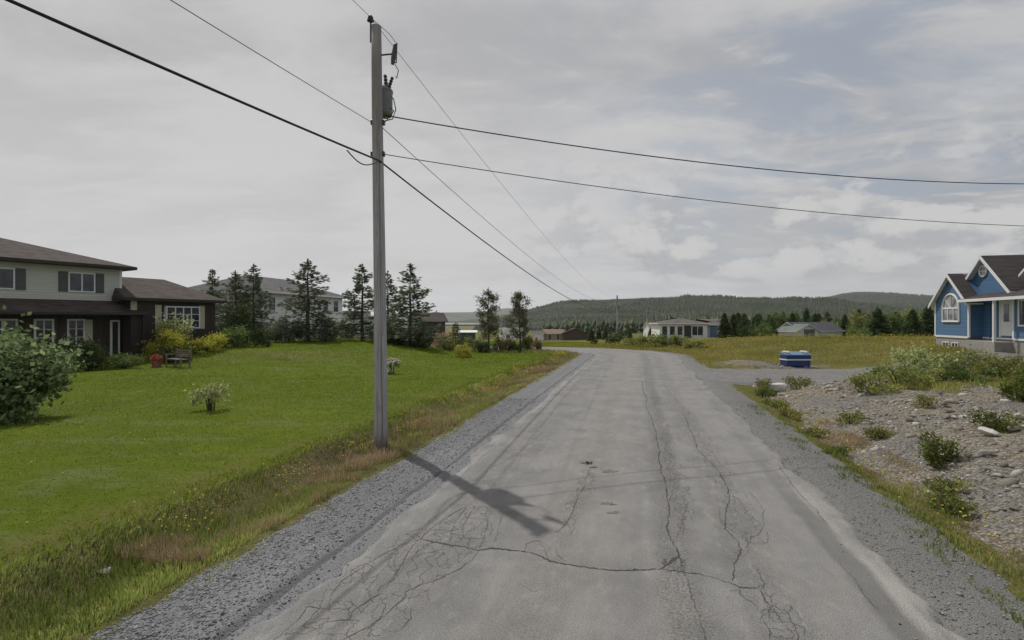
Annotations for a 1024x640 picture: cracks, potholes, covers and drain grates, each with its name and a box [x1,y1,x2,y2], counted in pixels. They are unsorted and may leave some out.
crack [650,381,694,537]
crack [276,409,810,640]
